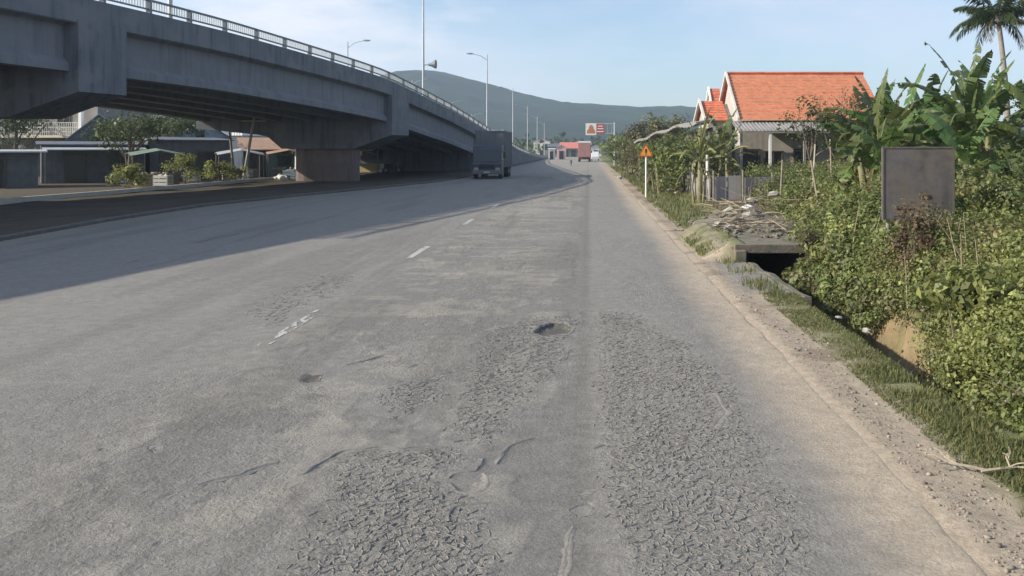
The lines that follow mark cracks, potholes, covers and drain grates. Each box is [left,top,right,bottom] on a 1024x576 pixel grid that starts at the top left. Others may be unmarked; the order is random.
crack [194,461,278,486]
crack [276,314,584,576]
crack [589,308,810,576]
pothole [530,321,576,337]
pothole [297,373,324,384]
